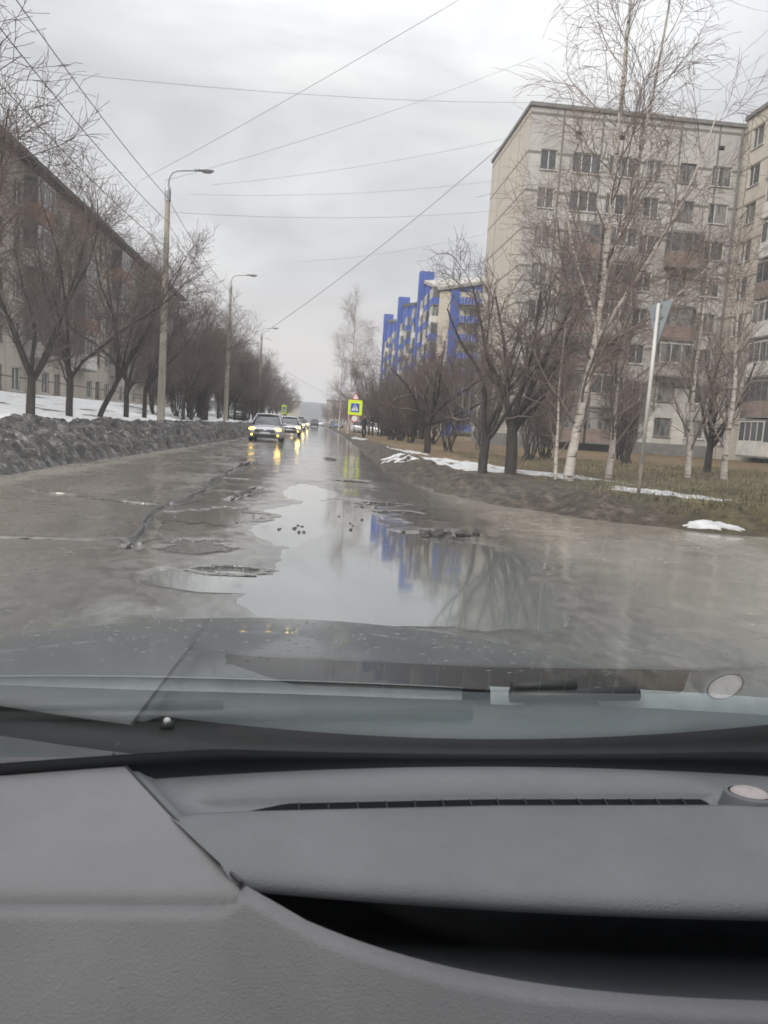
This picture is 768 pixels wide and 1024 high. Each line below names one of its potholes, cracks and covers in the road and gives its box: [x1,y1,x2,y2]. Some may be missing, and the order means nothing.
pothole [183,564,274,577]
pothole [157,537,240,554]
crack [0,468,261,549]
